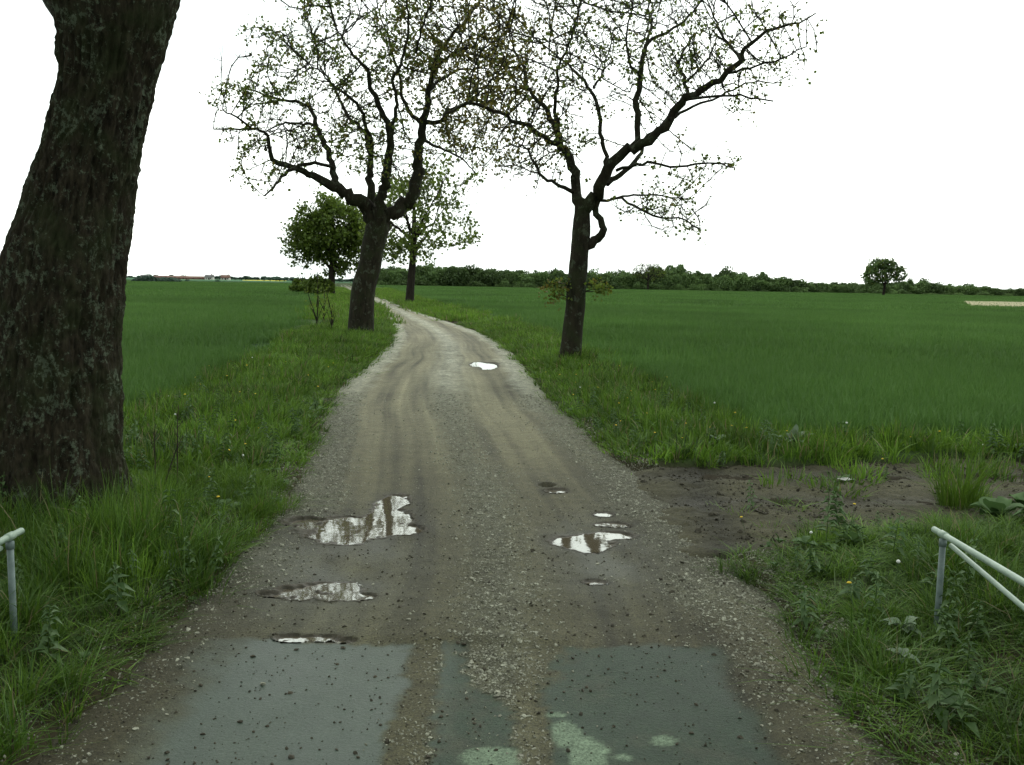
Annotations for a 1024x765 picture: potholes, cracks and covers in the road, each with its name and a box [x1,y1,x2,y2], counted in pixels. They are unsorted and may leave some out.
pothole [270,633,357,644]
pothole [468,362,500,370]
pothole [254,581,379,602]
pothole [274,493,429,547]
pothole [545,530,640,554]
